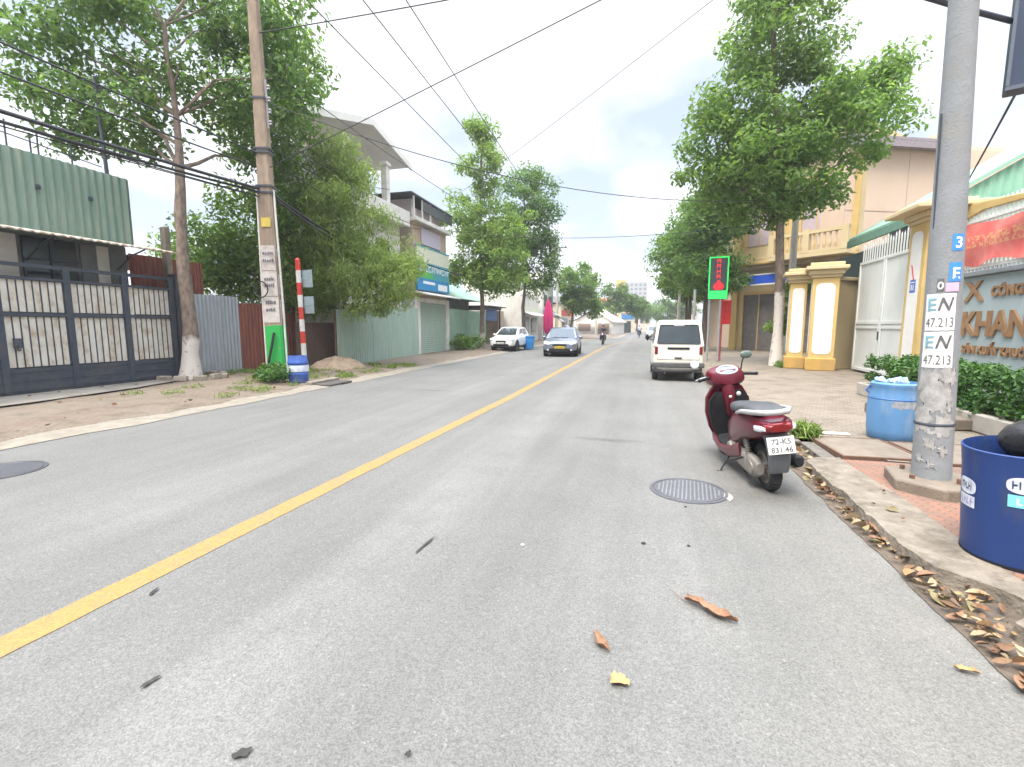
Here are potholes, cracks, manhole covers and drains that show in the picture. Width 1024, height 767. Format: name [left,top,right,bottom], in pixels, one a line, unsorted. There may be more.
drain grate [306,377,352,386]
manhole cover [0,460,49,479]
manhole cover [650,478,728,504]
